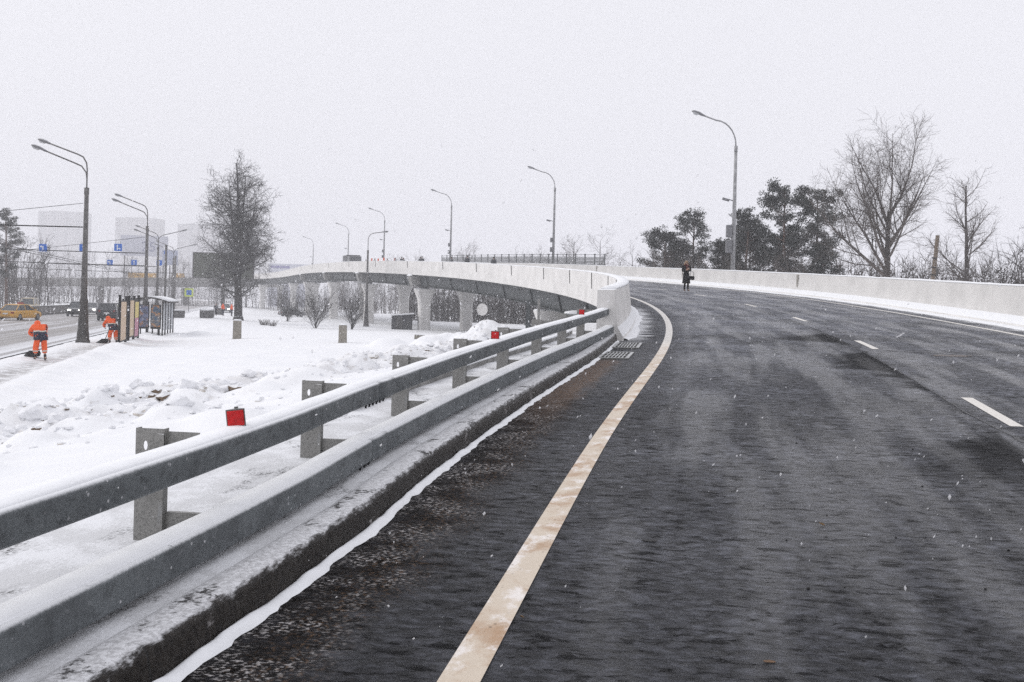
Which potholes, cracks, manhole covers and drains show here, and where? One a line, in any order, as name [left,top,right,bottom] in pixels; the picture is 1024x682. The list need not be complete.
drain grate [598,351,634,359]
